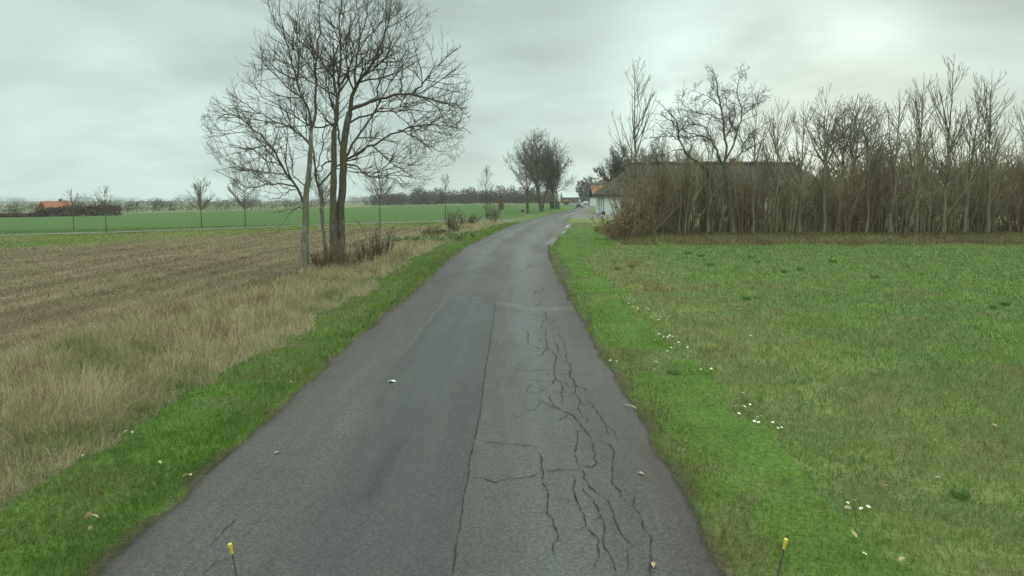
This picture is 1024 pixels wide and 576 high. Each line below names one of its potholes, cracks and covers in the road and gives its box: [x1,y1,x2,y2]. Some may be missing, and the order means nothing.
crack [479,311,653,574]
